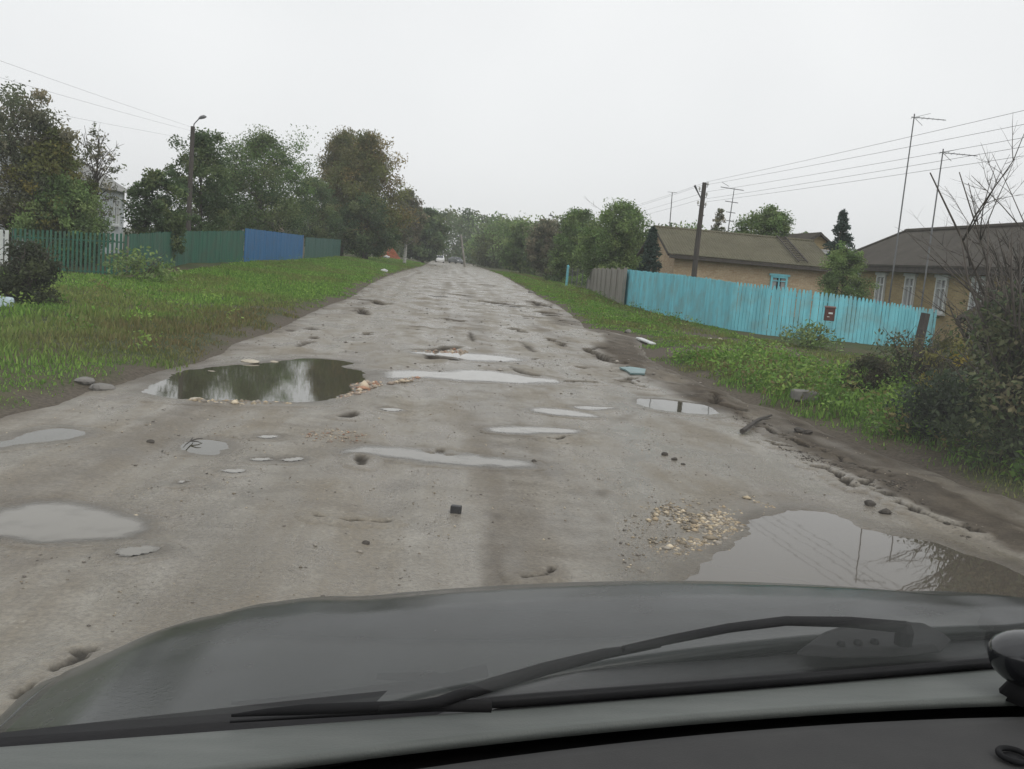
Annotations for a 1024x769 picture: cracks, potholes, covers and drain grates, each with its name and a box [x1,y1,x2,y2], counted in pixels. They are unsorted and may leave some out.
pothole [373,369,575,387]
pothole [617,496,1024,598]
pothole [0,424,108,454]
pothole [399,350,531,364]
pothole [160,436,247,457]
pothole [622,396,735,419]
pothole [328,444,549,472]
pothole [0,498,175,551]
pothole [105,354,397,408]
pothole [518,406,608,420]
pothole [88,541,185,565]
pothole [495,365,555,379]
